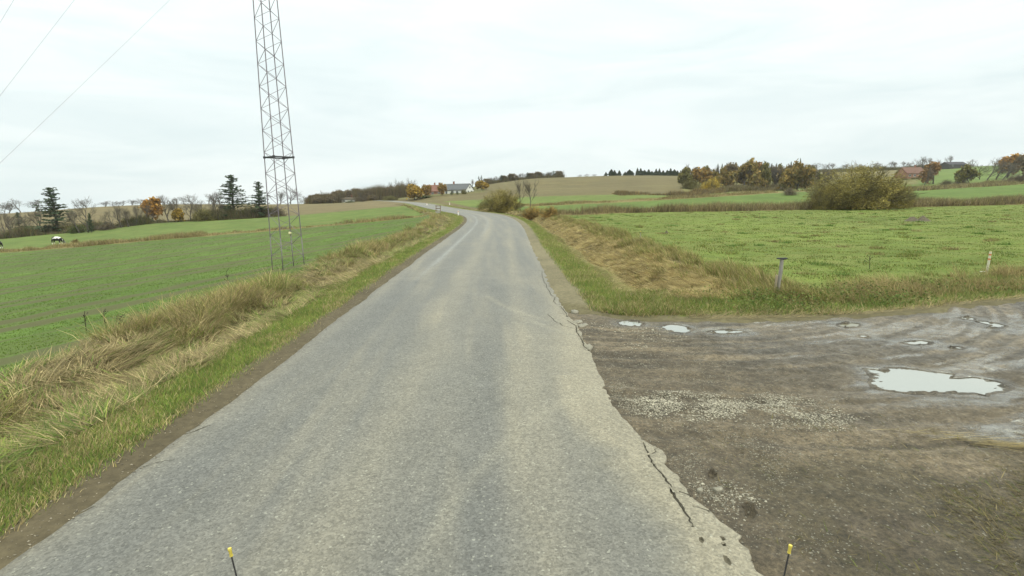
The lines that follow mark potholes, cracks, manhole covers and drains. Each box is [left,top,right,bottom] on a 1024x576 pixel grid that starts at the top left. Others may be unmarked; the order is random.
pothole [976,321,1009,329]
pothole [616,319,646,327]
pothole [861,367,1017,396]
pothole [659,324,694,333]
pothole [720,554,736,569]
crack [640,442,709,527]
crack [541,271,589,351]
pothole [695,535,708,546]
